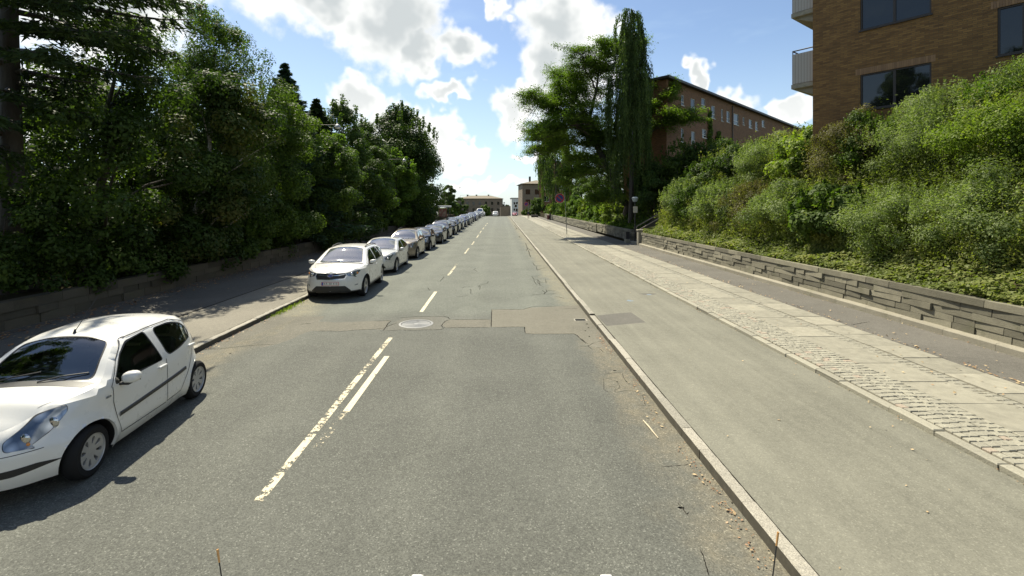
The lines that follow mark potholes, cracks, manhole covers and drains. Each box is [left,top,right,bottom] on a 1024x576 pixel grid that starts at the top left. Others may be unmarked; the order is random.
manhole cover [399,319,433,328]
